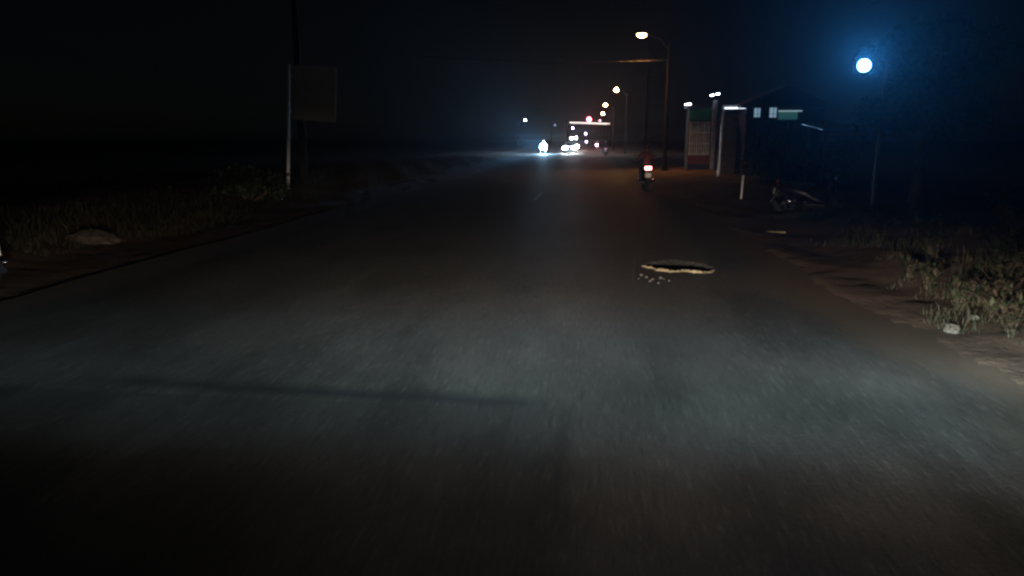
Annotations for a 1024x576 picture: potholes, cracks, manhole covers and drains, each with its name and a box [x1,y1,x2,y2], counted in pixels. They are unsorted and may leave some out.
pothole [641,259,714,273]
